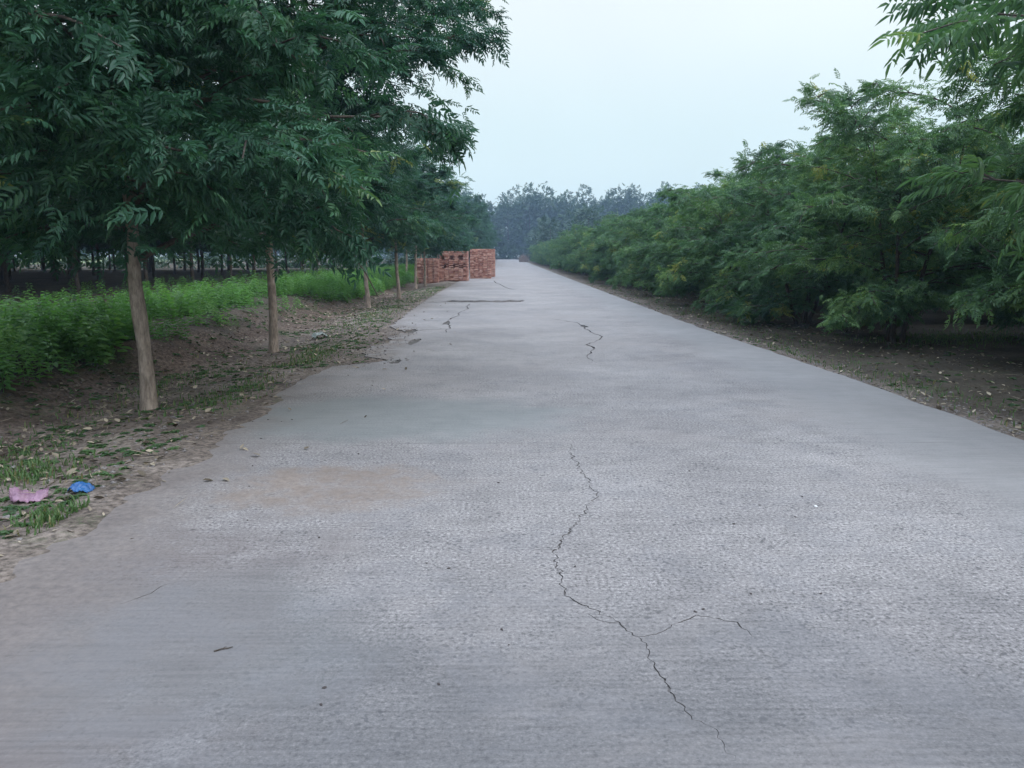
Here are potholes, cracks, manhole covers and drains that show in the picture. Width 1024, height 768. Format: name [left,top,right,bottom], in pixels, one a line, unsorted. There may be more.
crack [552,444,756,757]
crack [419,282,523,332]
